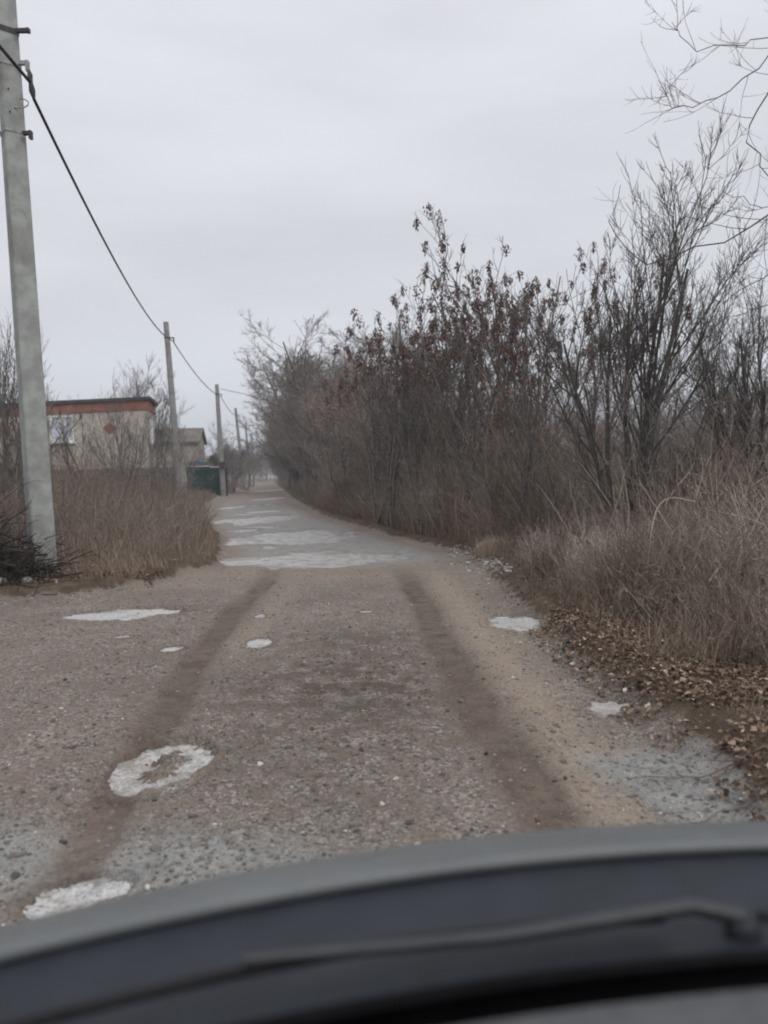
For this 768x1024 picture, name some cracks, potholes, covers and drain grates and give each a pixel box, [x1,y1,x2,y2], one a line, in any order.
pothole [93,732,229,806]
